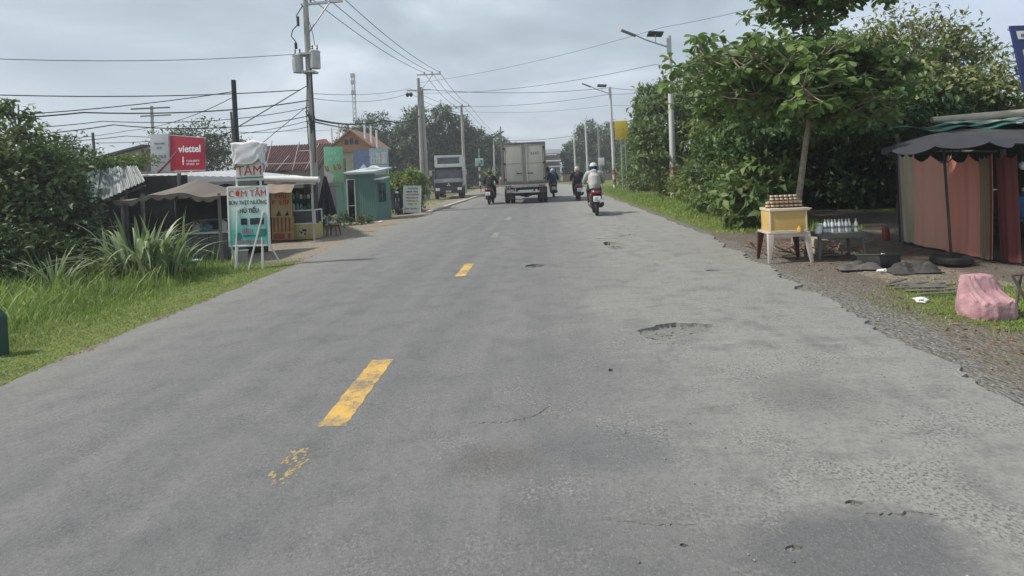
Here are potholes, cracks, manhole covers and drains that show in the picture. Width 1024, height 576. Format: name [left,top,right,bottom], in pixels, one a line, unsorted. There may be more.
pothole [785,544,804,552]
pothole [604,241,628,250]
crack [467,406,549,424]
pothole [638,322,716,340]
